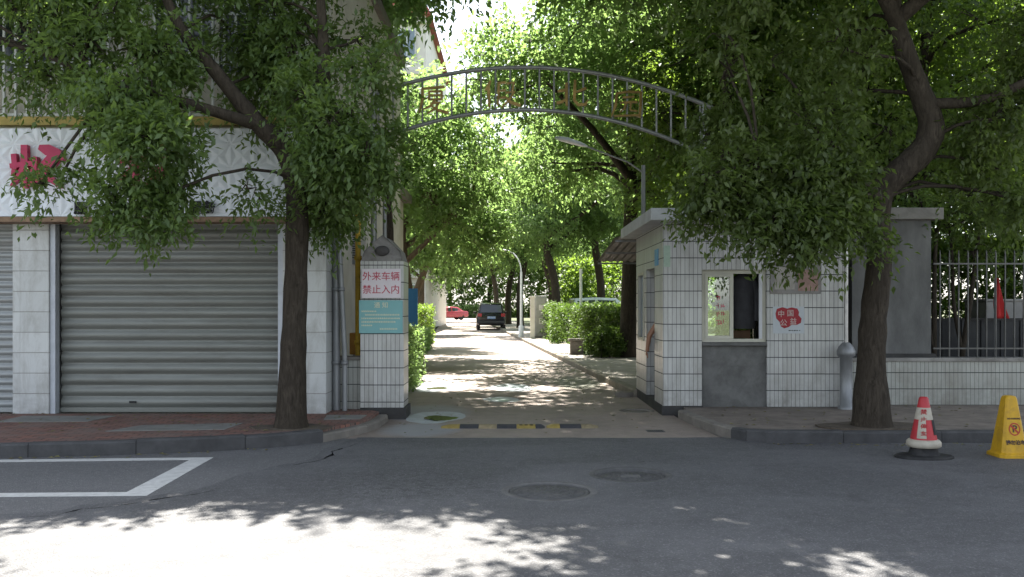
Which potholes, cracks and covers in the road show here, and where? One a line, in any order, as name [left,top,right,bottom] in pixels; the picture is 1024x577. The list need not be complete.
manhole cover [501,481,598,501]
manhole cover [589,467,673,483]
